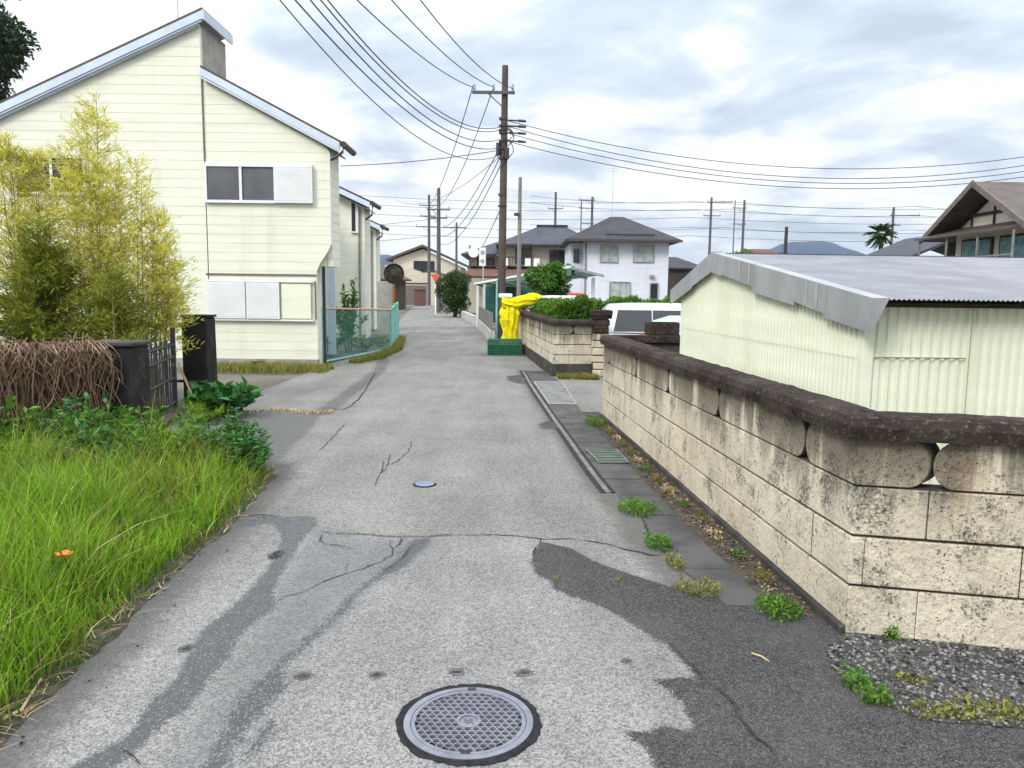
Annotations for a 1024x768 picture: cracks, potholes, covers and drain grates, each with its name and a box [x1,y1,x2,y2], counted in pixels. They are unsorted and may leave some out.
crack [375,439,504,485]
pothole [513,668,535,677]
drain grate [586,449,630,463]
manhole cover [395,683,542,767]
pothole [369,670,388,679]
drain grate [534,381,577,405]
crack [321,373,375,449]
crack [670,644,777,758]
crack [239,514,654,601]
pothole [267,550,286,560]
